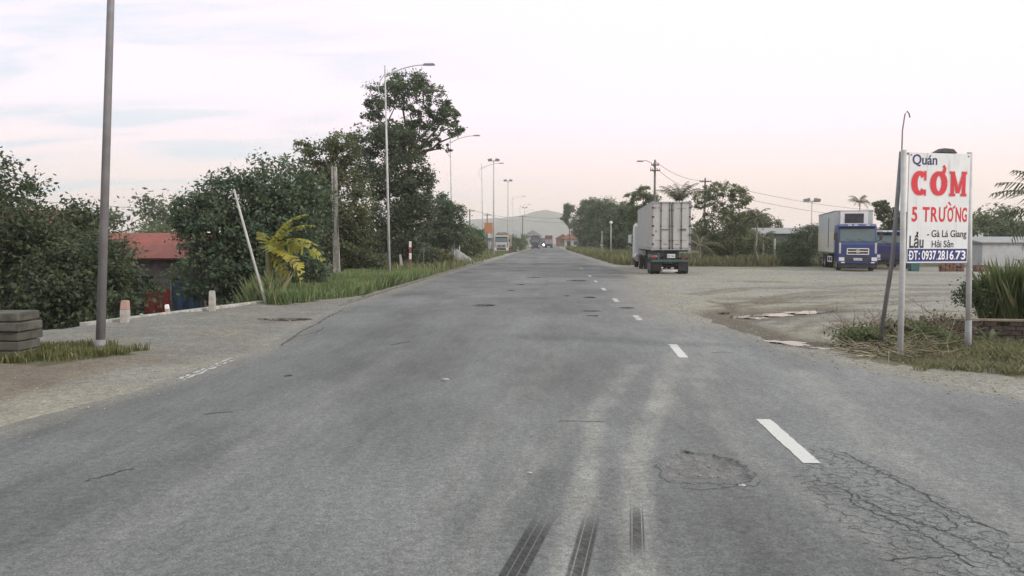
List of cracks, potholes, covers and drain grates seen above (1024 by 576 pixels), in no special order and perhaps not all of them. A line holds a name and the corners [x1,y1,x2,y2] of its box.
crack [281,310,342,346]
crack [794,448,1024,576]
pothole [651,448,761,486]
